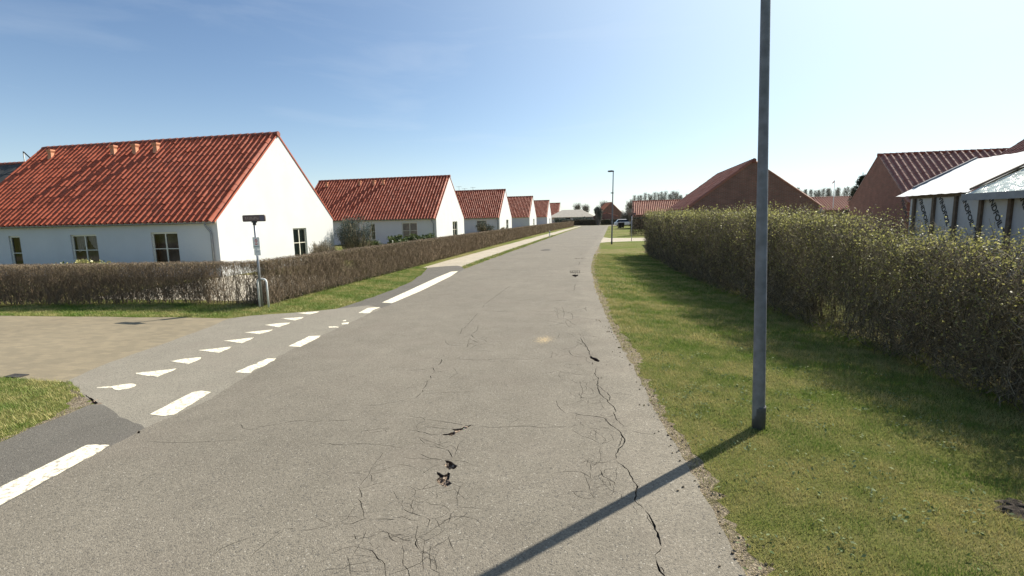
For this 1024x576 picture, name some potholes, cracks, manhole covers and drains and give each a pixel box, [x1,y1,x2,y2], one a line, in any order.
crack [210,456,480,576]
crack [329,258,665,576]
pothole [436,472,452,487]
